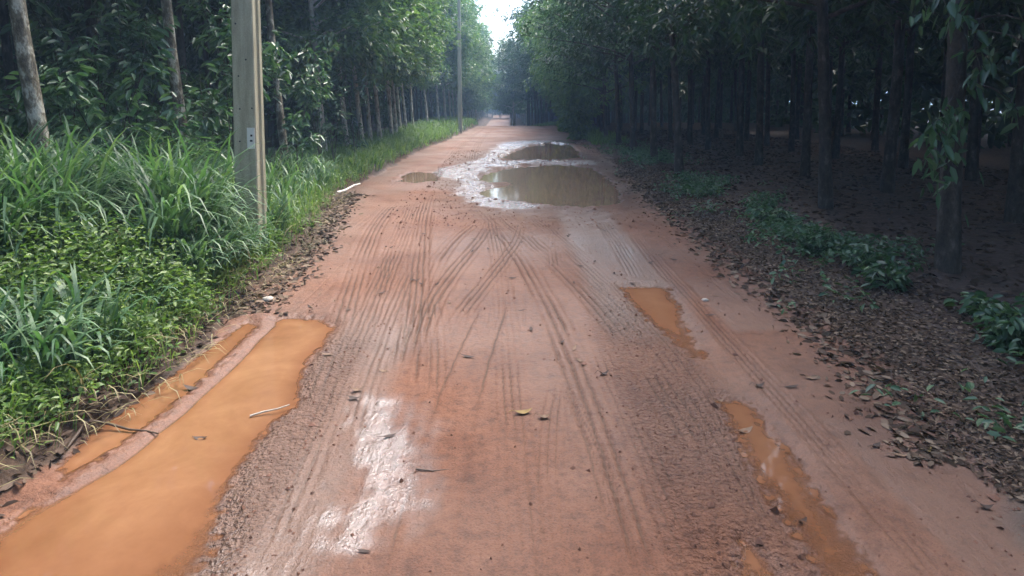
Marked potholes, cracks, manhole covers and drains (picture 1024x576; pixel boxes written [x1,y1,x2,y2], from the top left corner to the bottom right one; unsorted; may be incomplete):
pothole [466,162,630,209]
pothole [713,395,880,576]
pothole [491,142,588,161]
pothole [618,284,712,360]
pothole [391,170,443,183]
